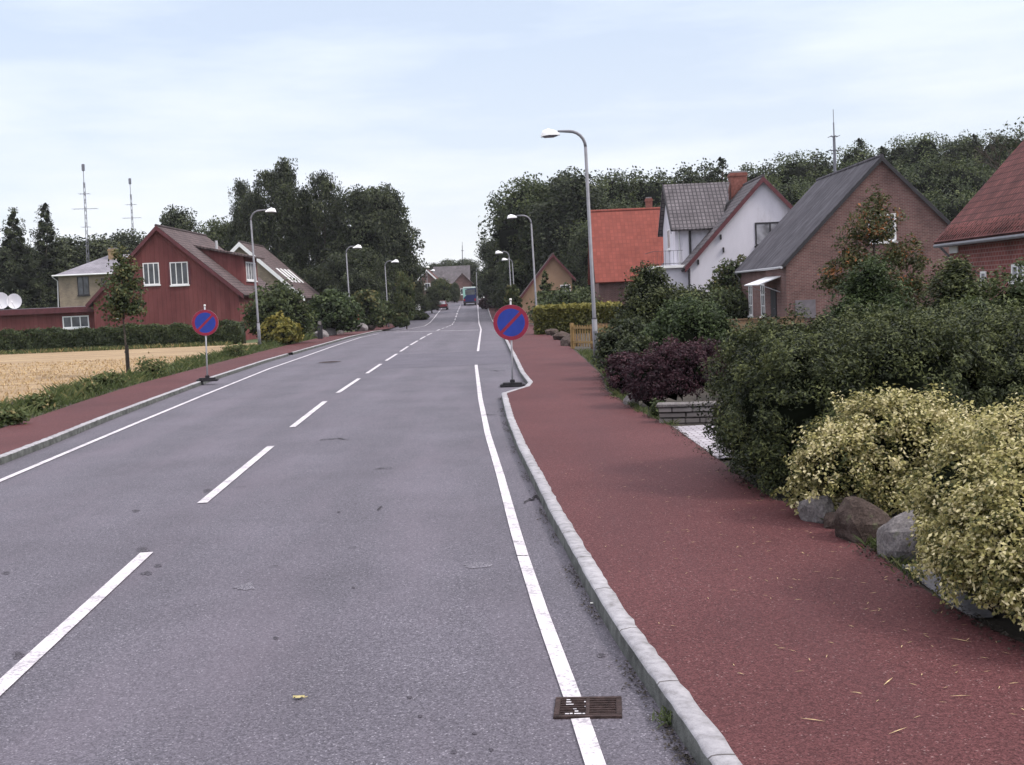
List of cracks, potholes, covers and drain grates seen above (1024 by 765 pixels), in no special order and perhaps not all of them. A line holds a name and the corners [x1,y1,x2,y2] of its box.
drain grate [553,696,622,719]
